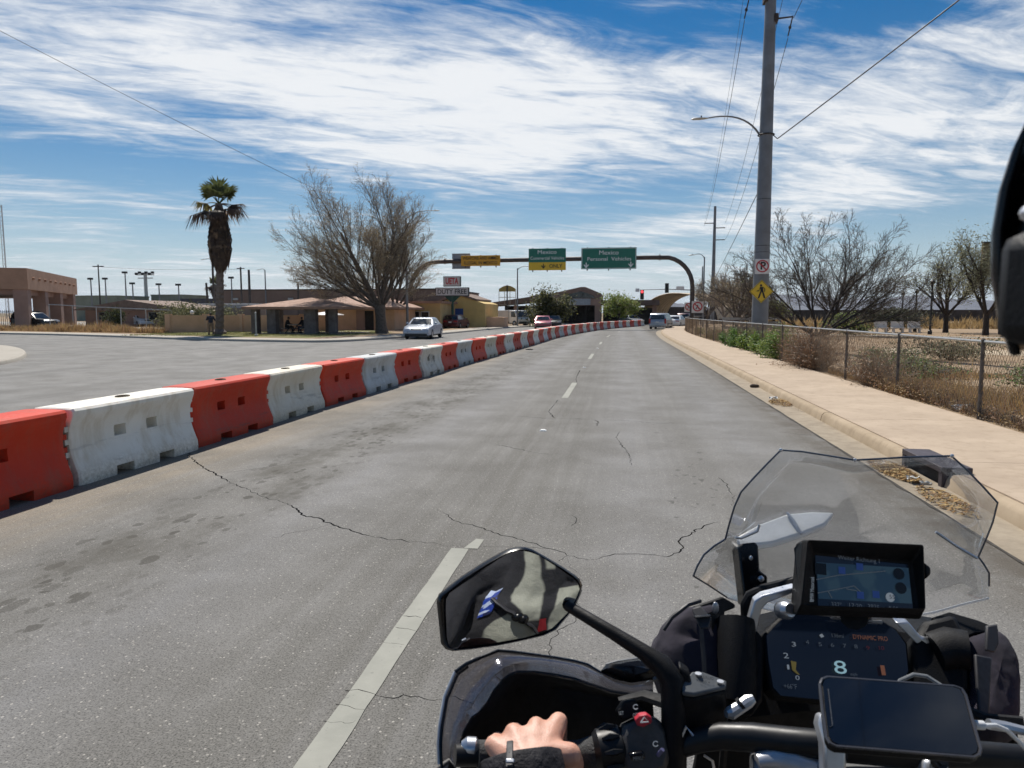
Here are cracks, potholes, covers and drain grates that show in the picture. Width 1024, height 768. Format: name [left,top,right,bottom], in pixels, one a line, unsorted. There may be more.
crack [187,452,716,660]
crack [325,689,464,723]
